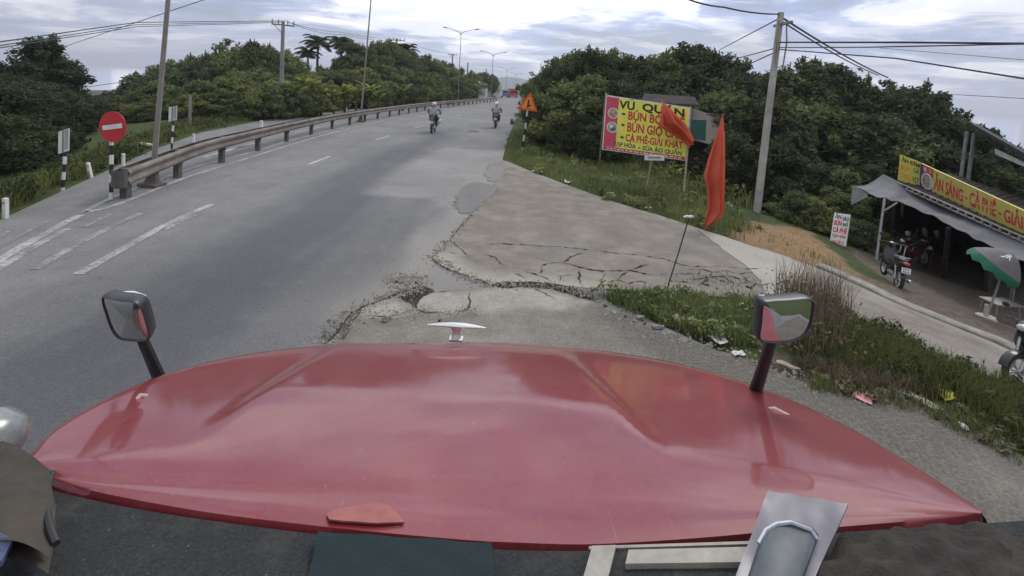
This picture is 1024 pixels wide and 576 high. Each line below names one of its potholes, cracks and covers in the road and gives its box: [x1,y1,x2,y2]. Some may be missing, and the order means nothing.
pothole [397,285,434,308]
crack [323,215,768,344]
